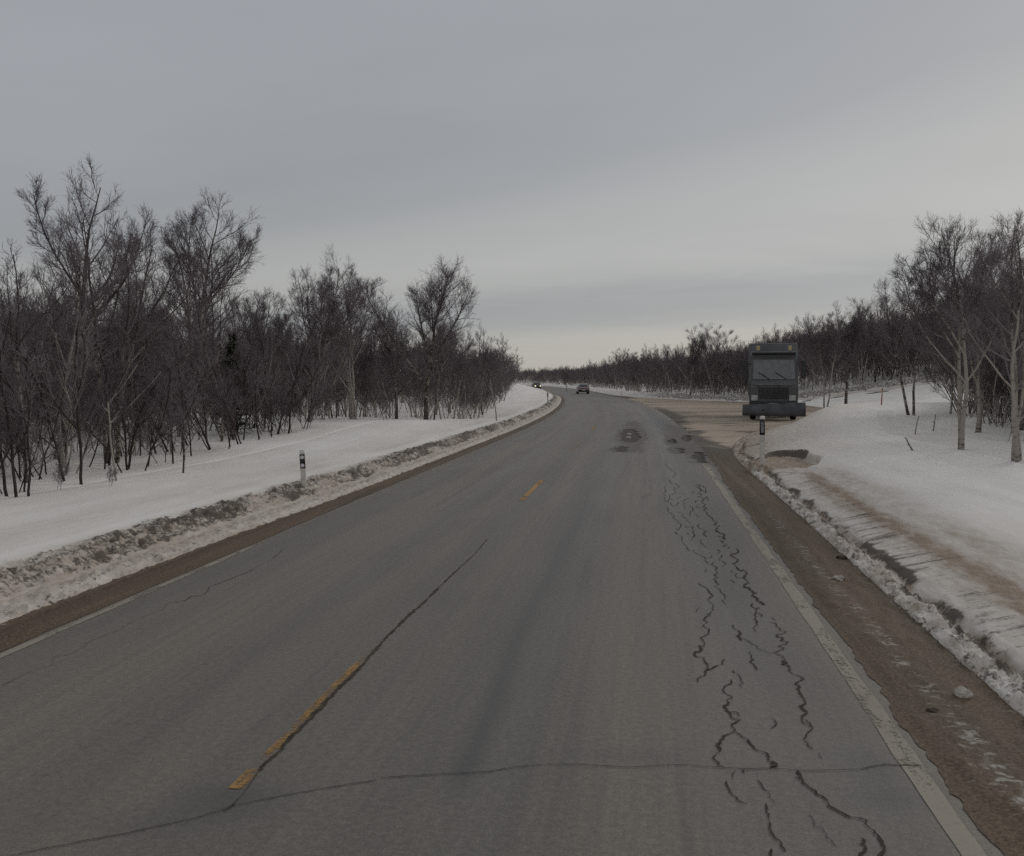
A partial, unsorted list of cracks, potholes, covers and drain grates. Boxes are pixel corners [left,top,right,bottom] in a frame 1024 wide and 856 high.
pothole [692,452,707,463]
pothole [621,429,641,442]
crack [13,465,905,856]
